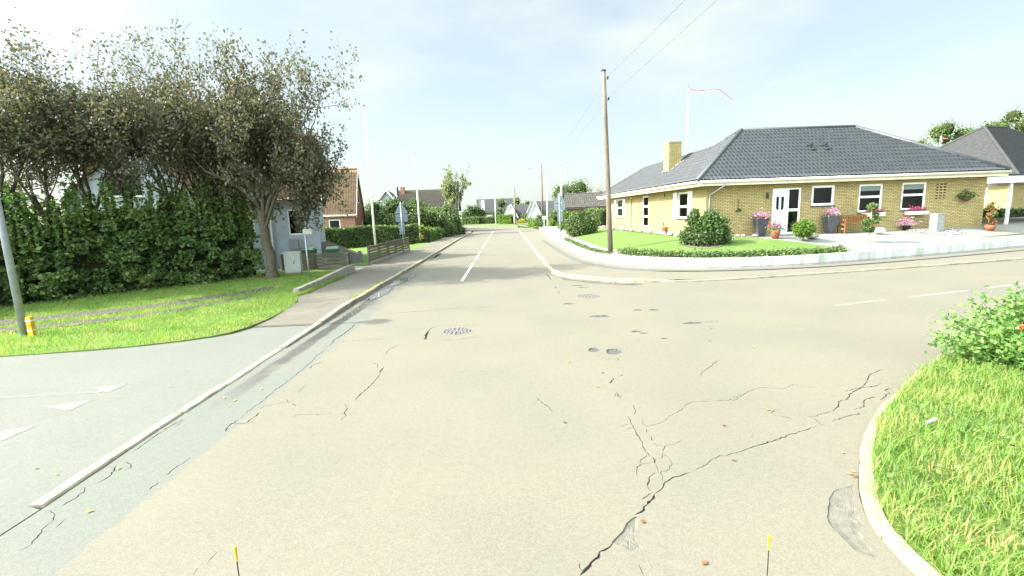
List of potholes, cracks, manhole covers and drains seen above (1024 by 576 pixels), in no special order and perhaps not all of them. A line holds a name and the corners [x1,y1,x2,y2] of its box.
crack [225,324,394,431]
crack [623,370,890,515]
manhole cover [442,327,474,335]
crack [21,420,184,550]
crack [579,543,613,575]
